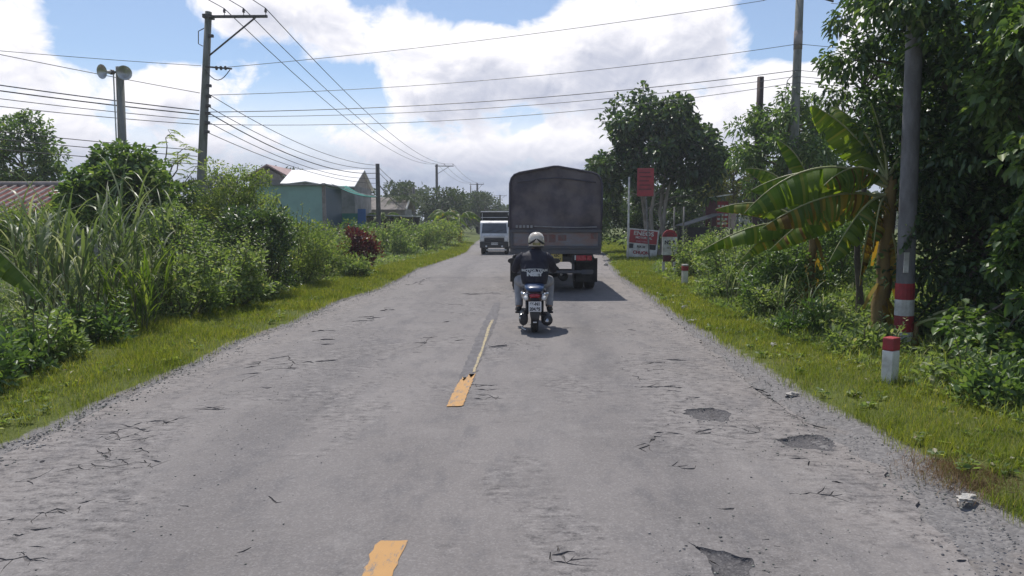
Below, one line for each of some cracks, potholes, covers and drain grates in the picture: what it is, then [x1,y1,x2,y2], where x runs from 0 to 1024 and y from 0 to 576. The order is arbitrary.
pothole [685,540,756,576]
crack [58,405,224,472]
crack [237,330,335,389]
pothole [775,434,837,451]
crack [791,481,851,503]
pothole [682,408,731,422]
crack [744,386,824,428]
crack [549,547,590,566]
crack [0,498,131,573]
crack [637,424,761,452]
